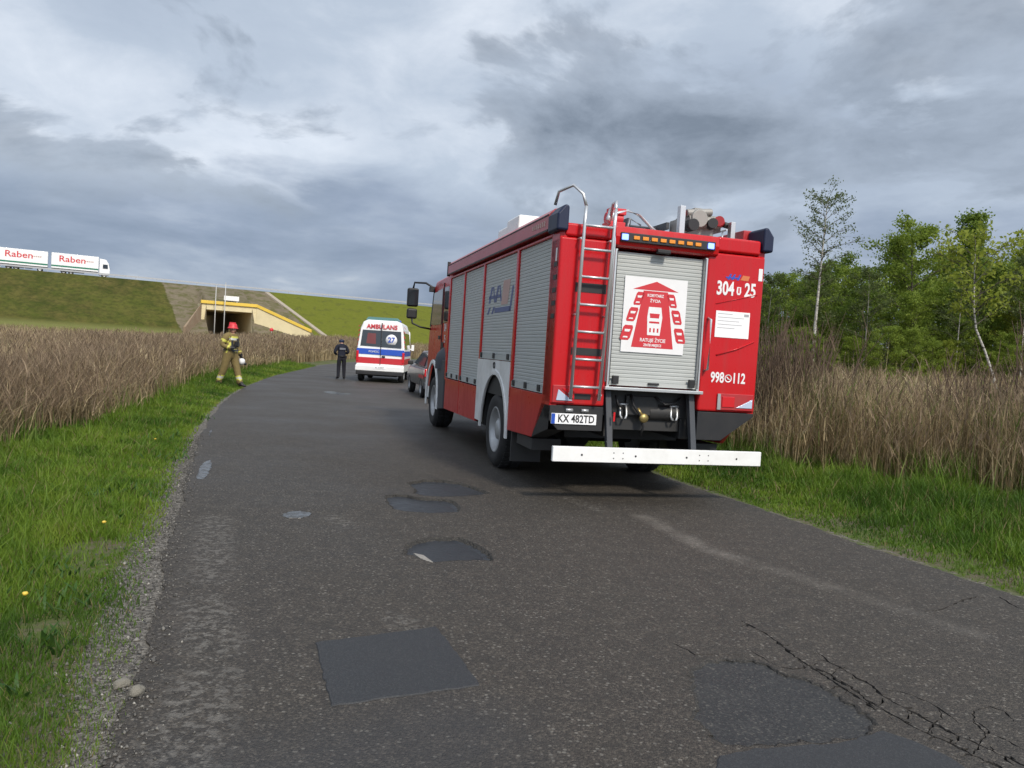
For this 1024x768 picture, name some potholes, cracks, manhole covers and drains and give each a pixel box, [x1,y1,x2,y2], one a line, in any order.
pothole [407,479,490,497]
crack [743,623,1024,768]
pothole [401,537,494,563]
pothole [385,494,461,513]
